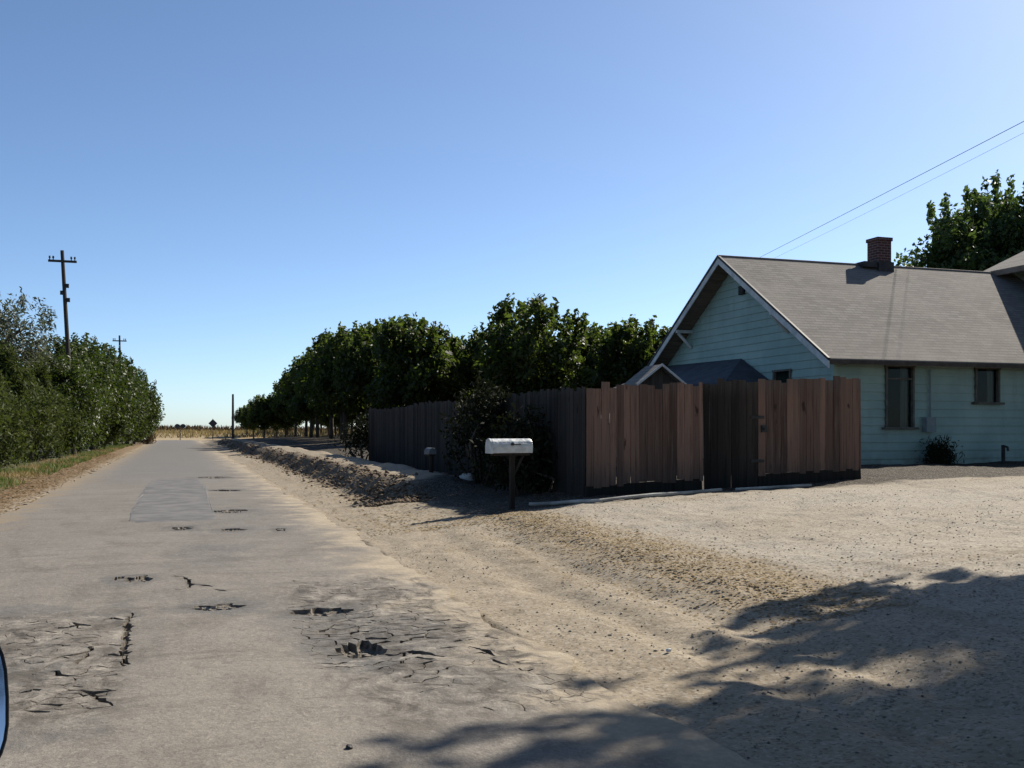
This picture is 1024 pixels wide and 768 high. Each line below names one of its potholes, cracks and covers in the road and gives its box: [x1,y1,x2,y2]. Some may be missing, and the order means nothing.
pothole [290,607,355,617]
crack [1,613,134,715]
pothole [193,603,246,611]
crack [287,580,592,711]
pothole [124,575,153,583]
crack [175,576,226,591]
pothole [334,640,388,659]
